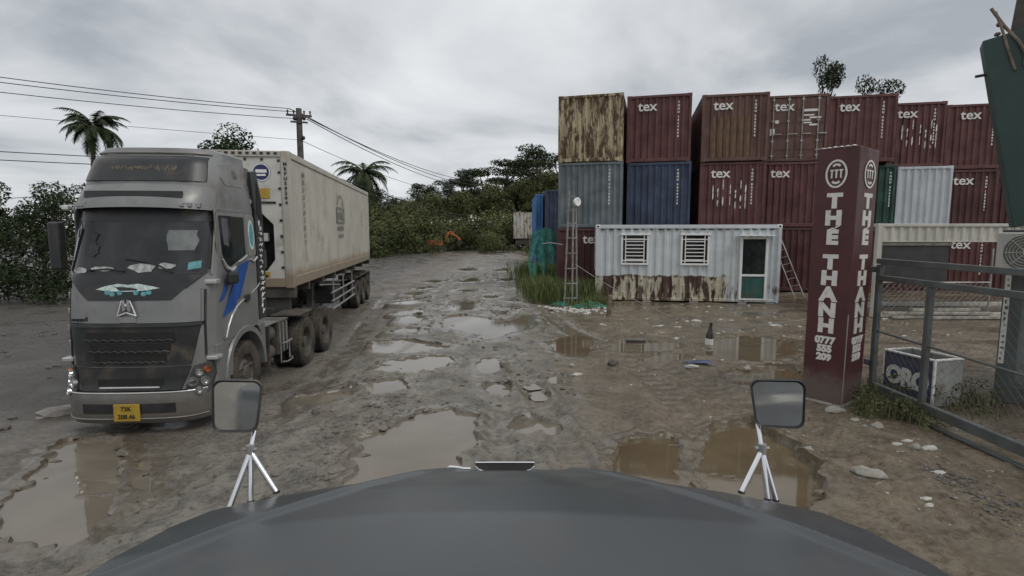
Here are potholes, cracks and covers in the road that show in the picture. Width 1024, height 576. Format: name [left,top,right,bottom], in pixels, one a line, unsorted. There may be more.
pothole [357,337,456,357]
pothole [494,410,574,445]
pothole [352,373,418,399]
pothole [429,312,551,343]
pothole [0,431,147,560]
pothole [467,354,513,376]
pothole [472,377,523,401]
pothole [363,353,462,375]
pothole [326,403,500,488]
